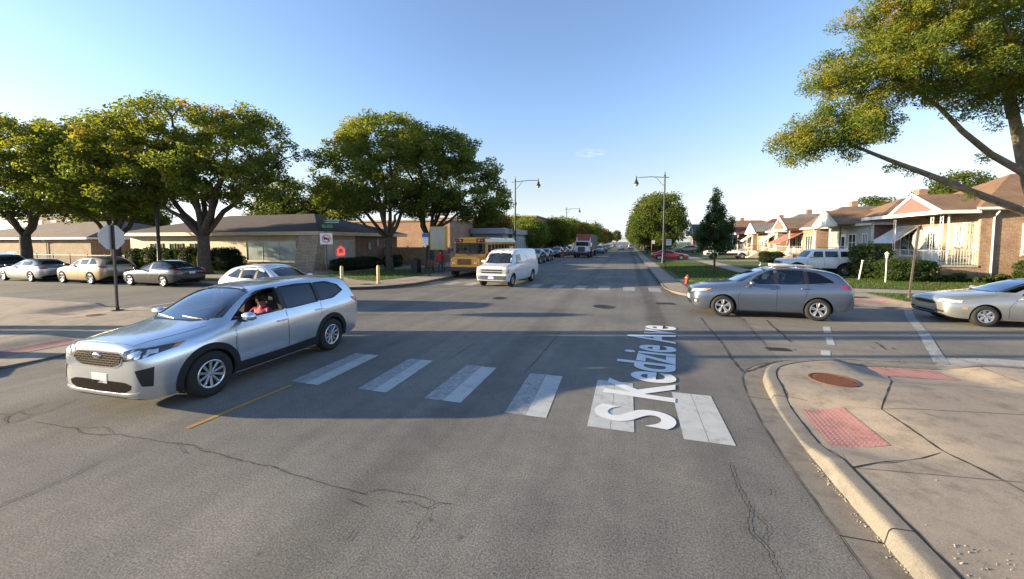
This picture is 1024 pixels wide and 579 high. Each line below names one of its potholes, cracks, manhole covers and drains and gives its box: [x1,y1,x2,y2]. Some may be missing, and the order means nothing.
crack [700,317,792,372]
crack [730,465,781,579]
crack [2,399,452,543]
manhole cover [808,373,860,387]
